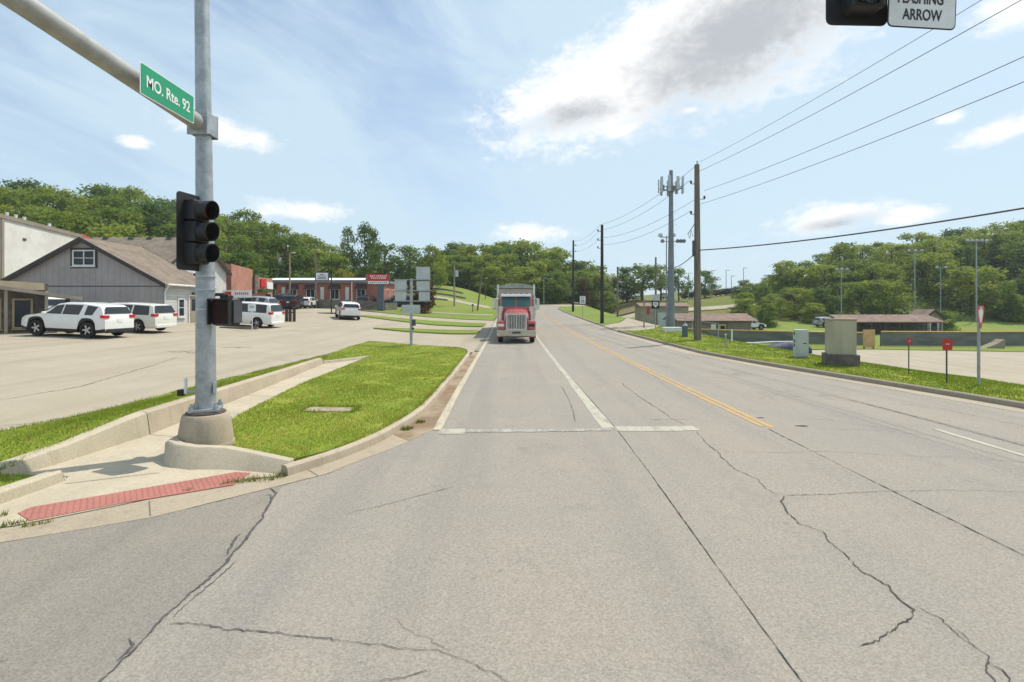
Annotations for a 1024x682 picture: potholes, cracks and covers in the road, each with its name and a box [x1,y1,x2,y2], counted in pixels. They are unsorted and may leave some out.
crack [7,350,194,399]
crack [623,384,1024,682]
crack [180,617,508,682]
